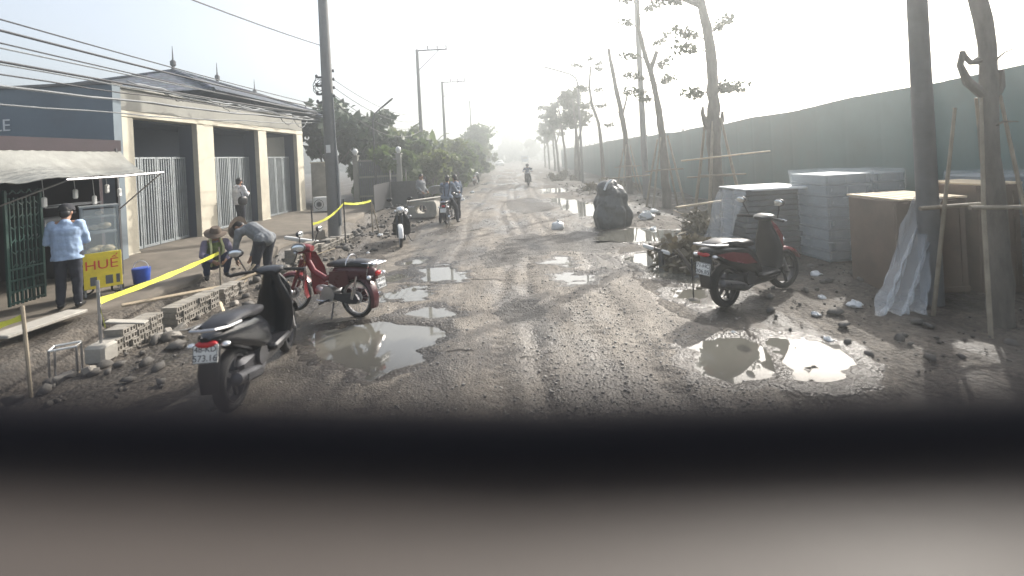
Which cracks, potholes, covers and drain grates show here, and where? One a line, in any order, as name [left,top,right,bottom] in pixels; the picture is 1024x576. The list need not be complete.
pothole [762,330,891,376]
pothole [365,285,442,303]
pothole [391,301,472,322]
pothole [667,328,818,379]
pothole [399,263,482,286]
pothole [533,255,585,268]
pothole [544,270,610,287]
pothole [547,198,594,217]
pothole [292,313,462,383]
